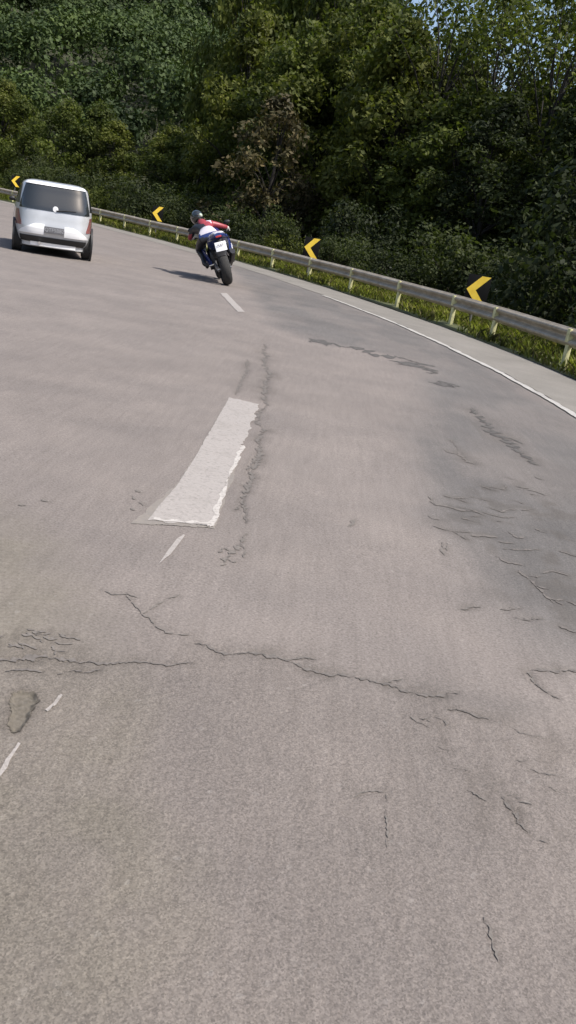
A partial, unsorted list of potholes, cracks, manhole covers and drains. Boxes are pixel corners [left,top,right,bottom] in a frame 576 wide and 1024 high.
crack [428,476,576,632]
crack [484,916,499,961]
crack [526,667,576,699]
crack [219,344,272,565]
crack [445,440,474,464]
crack [0,589,558,843]
crack [308,338,460,388]
pothole [7,690,40,733]
